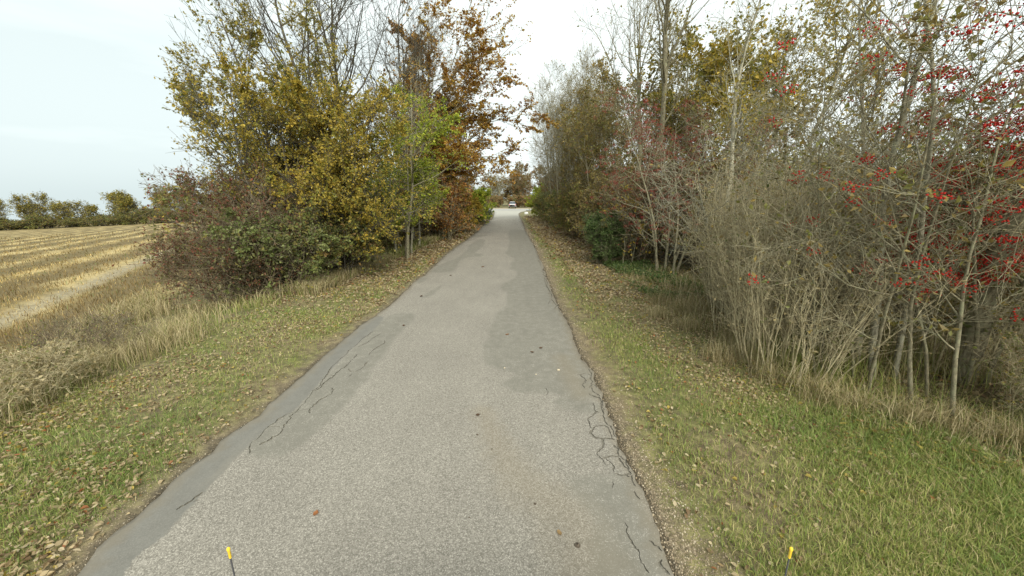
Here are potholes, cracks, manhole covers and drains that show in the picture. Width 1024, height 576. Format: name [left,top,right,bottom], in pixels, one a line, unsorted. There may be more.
crack [625,523,670,575]
crack [578,369,640,499]
crack [234,332,385,454]
